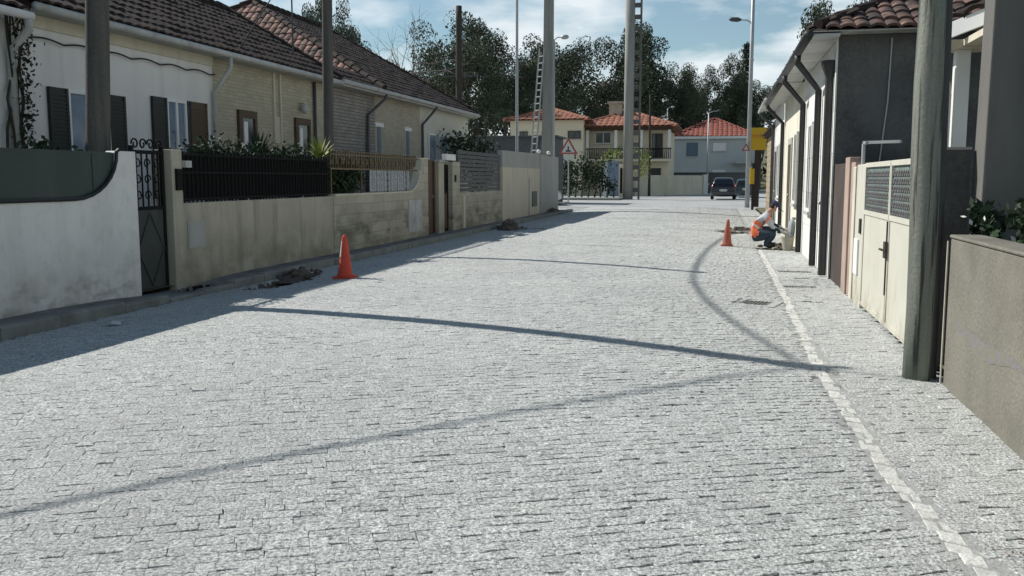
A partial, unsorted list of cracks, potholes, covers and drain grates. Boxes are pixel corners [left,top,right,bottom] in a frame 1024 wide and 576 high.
drain grate [736,299,784,308]
